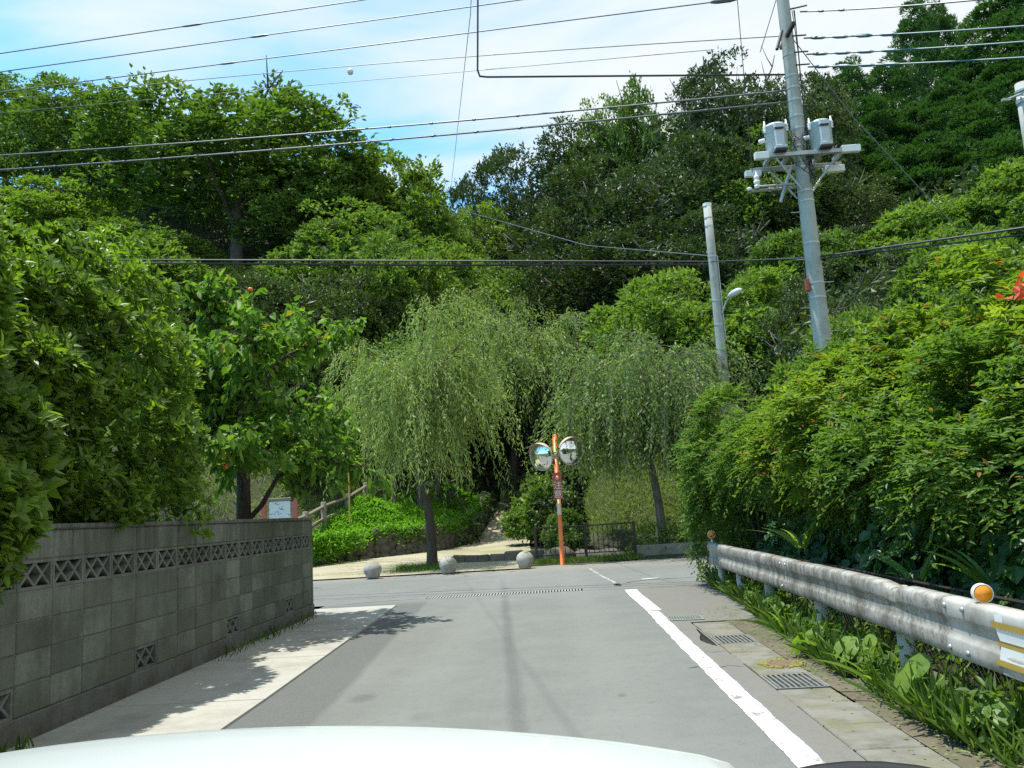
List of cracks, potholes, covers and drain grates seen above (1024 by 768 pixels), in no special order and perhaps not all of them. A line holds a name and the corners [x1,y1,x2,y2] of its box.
drain grate [427,588,583,599]
drain grate [759,673,831,691]
drain grate [709,634,759,645]
